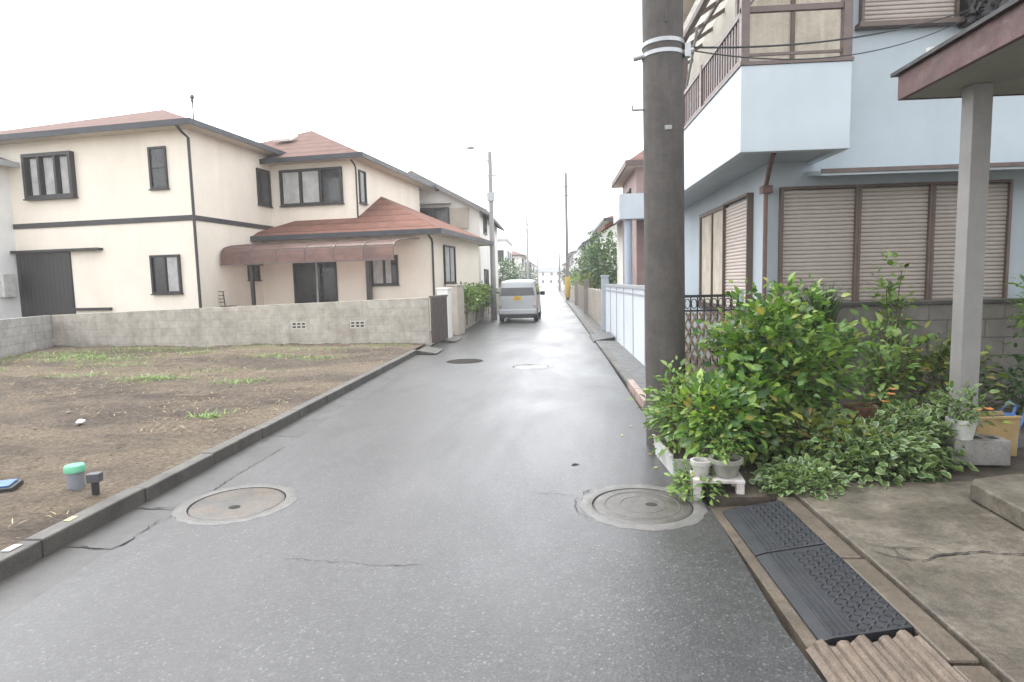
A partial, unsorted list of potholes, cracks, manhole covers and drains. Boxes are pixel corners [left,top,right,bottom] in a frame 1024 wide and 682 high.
crack [82,507,175,549]
crack [873,545,1024,560]
manhole cover [580,484,708,531]
manhole cover [171,483,298,526]
